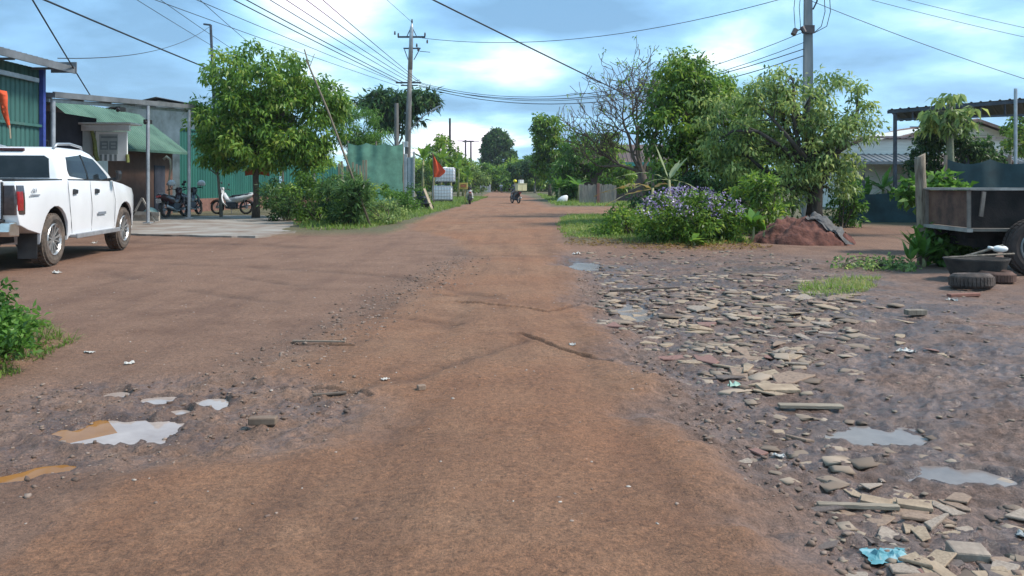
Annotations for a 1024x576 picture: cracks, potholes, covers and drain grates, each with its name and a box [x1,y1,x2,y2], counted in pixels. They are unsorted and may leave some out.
crack [517,332,615,362]
pothole [30,405,202,448]
pothole [184,392,242,411]
crack [454,300,589,312]
pothole [100,384,136,397]
pothole [136,391,187,404]
pothole [166,402,199,415]
